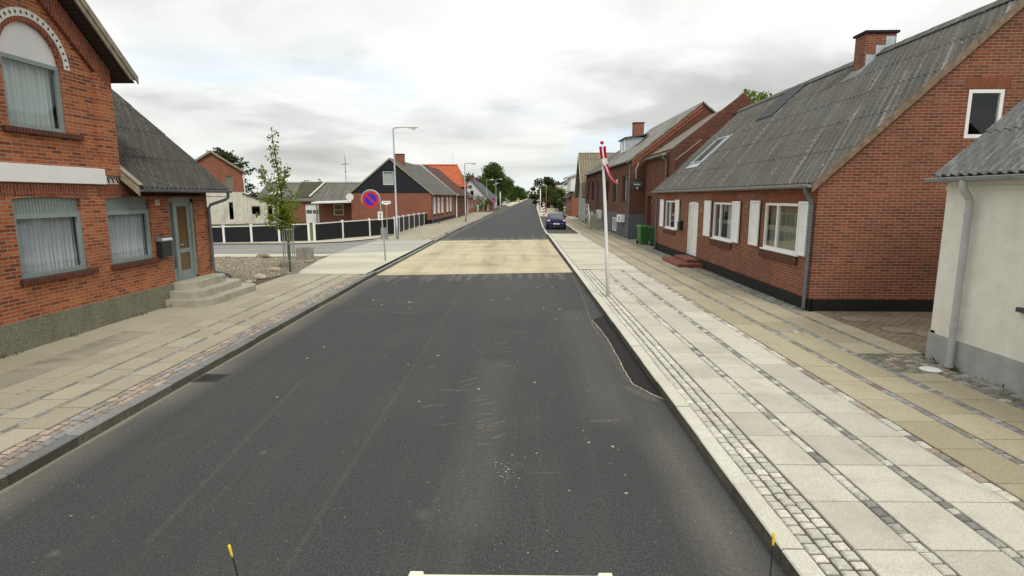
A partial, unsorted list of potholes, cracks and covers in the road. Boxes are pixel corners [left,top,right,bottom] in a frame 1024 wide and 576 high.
utility cover [918,366,944,374]
